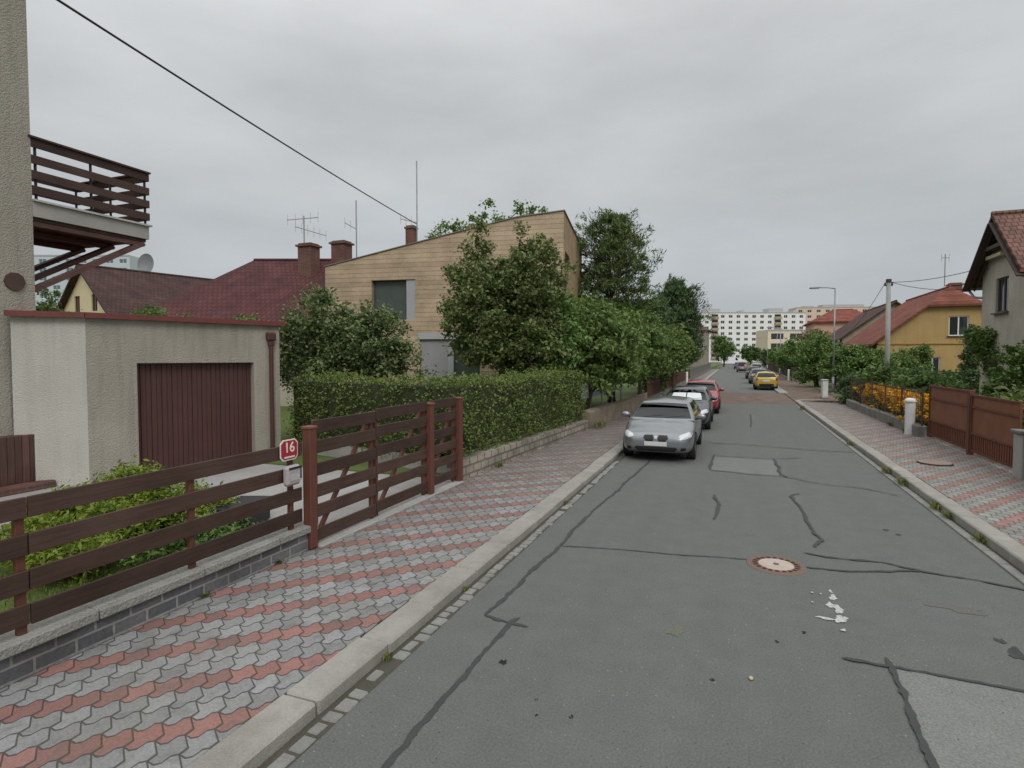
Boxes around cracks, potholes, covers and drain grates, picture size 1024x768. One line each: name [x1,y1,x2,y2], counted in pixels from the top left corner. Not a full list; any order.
crack [711,442,896,495]
crack [573,546,744,559]
manhole cover [746,555,807,576]
crack [804,552,1024,590]
